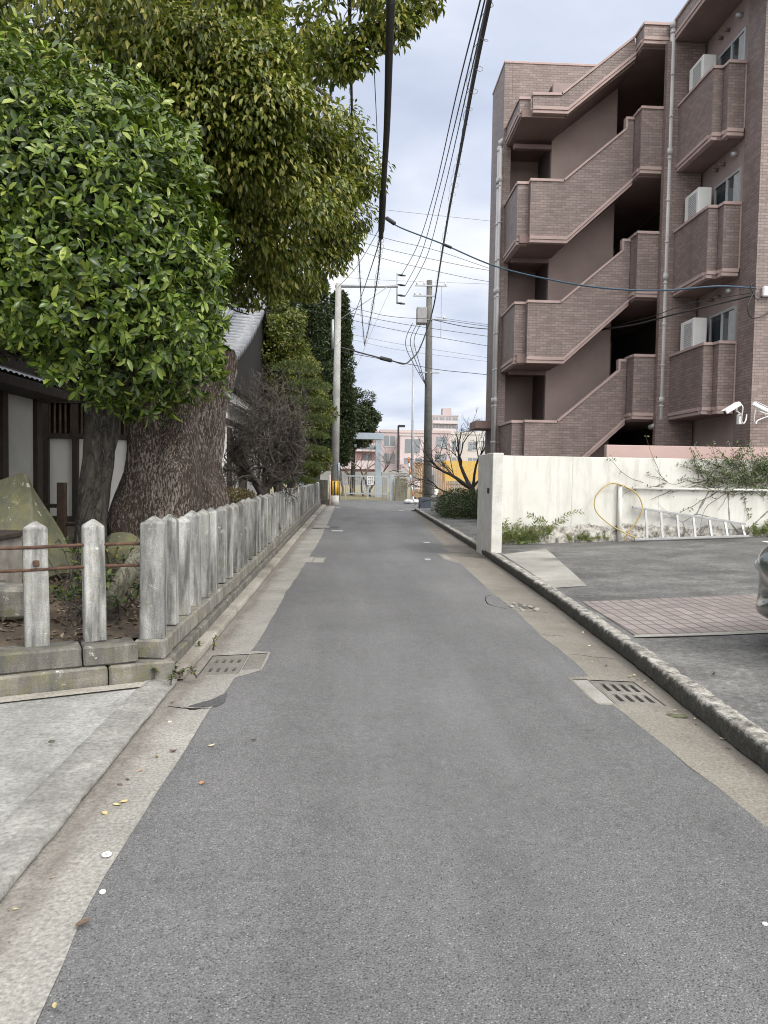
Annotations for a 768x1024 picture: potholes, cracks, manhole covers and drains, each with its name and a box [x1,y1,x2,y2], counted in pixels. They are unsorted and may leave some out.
drain grate [590,681,664,711]
drain grate [198,655,249,678]
